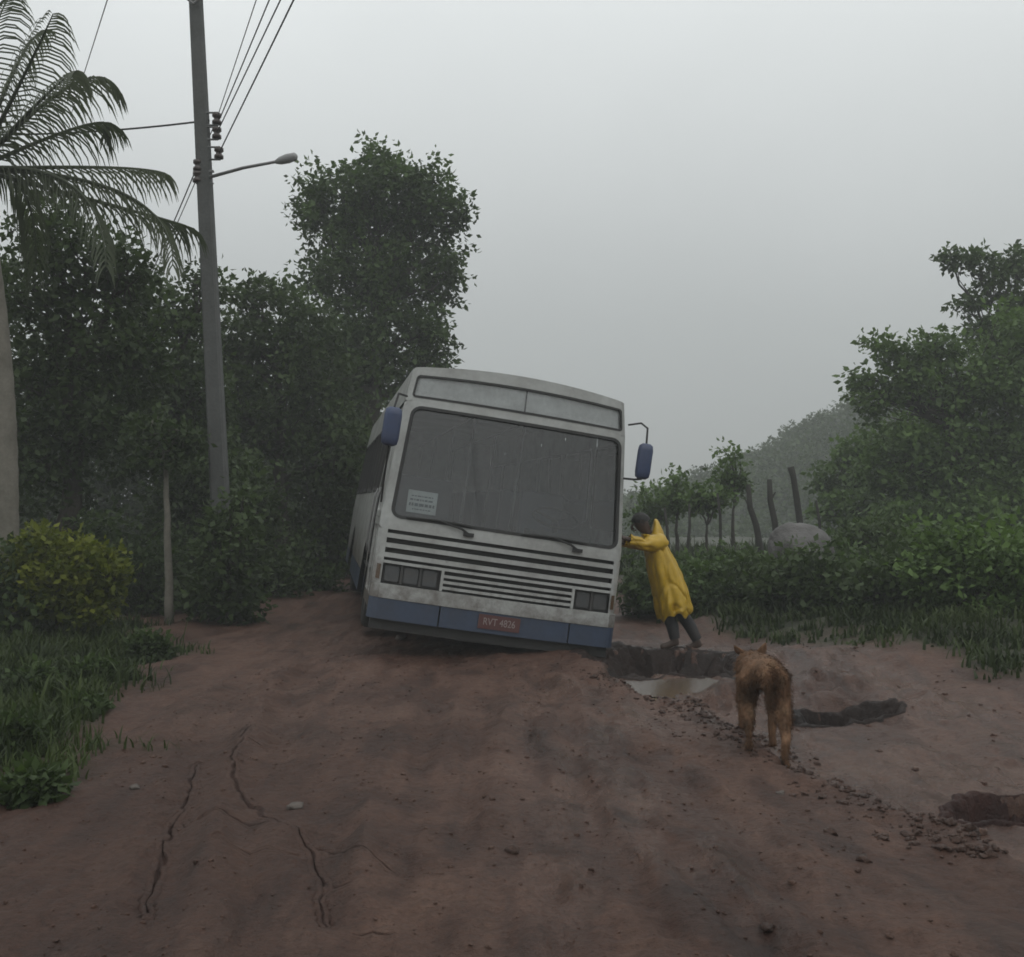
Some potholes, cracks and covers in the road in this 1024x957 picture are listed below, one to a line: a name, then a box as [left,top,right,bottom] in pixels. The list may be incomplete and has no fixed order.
pothole [791,698,907,728]
pothole [570,641,750,681]
pothole [938,790,1024,828]
crack [129,724,441,939]
